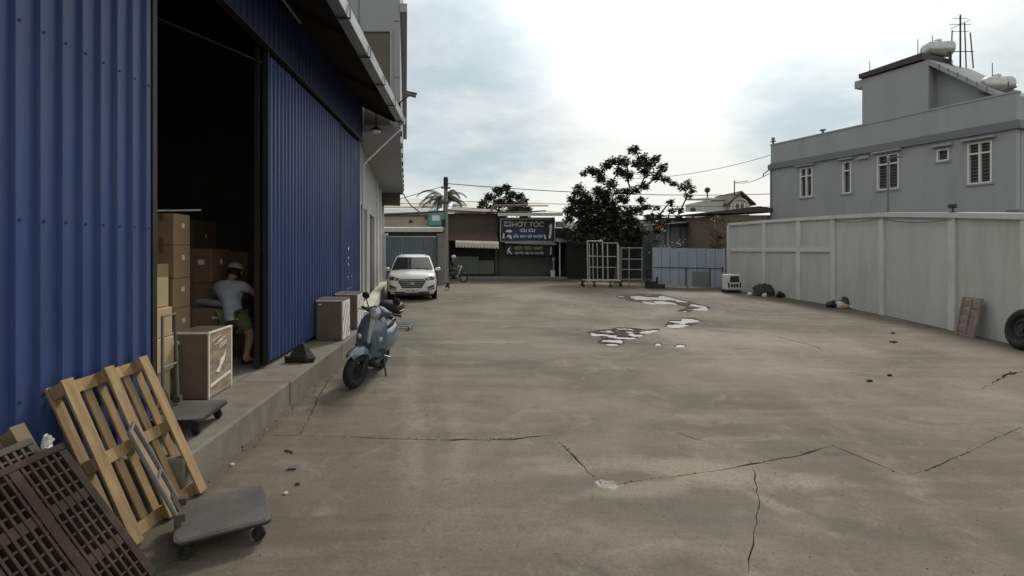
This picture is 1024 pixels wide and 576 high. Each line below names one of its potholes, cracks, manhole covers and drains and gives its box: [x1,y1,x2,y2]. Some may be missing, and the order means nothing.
crack [748,467,760,573]
crack [558,440,601,482]
crack [981,371,1022,390]
